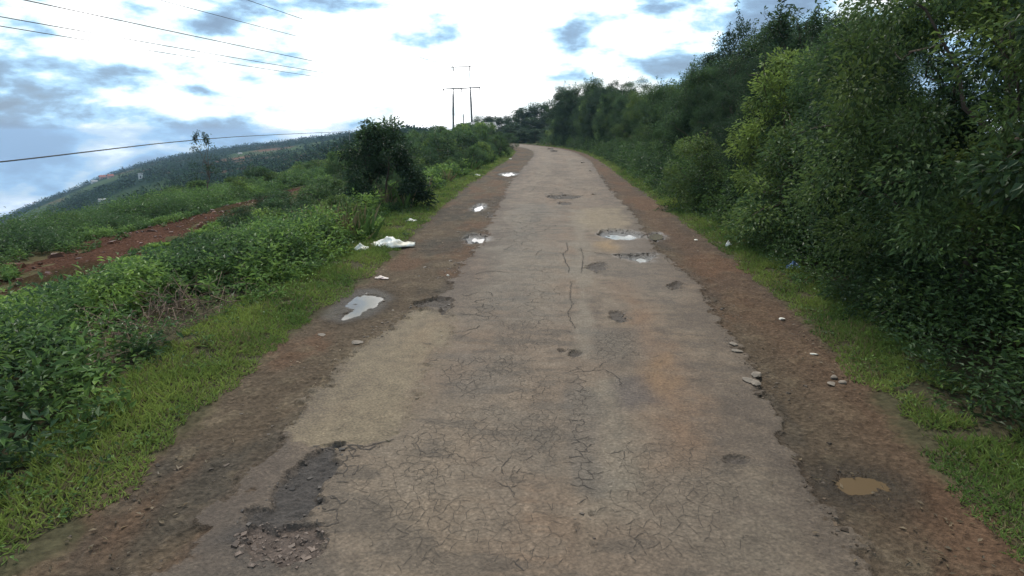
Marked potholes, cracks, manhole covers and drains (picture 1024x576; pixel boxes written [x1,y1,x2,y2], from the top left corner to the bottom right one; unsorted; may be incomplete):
pothole [583,261,609,273]
crack [314,164,756,574]
pothole [464,233,488,244]
pothole [608,310,632,323]
pothole [613,252,657,262]
pothole [594,228,645,240]
pothole [667,281,689,290]
pothole [231,517,333,569]
pothole [409,295,456,315]
pothole [236,441,349,531]
pothole [716,452,753,464]
